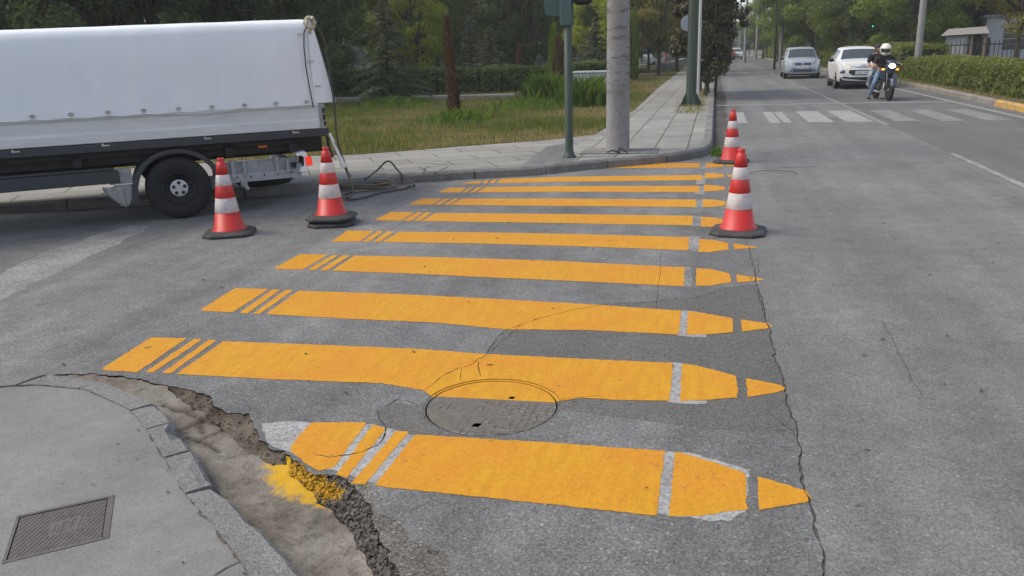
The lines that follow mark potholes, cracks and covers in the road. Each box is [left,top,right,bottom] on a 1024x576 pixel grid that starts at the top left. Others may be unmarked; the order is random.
pothole [288,459,400,576]
pothole [168,386,287,466]
utility cover [2,494,115,564]
manhole cover [422,379,561,437]
